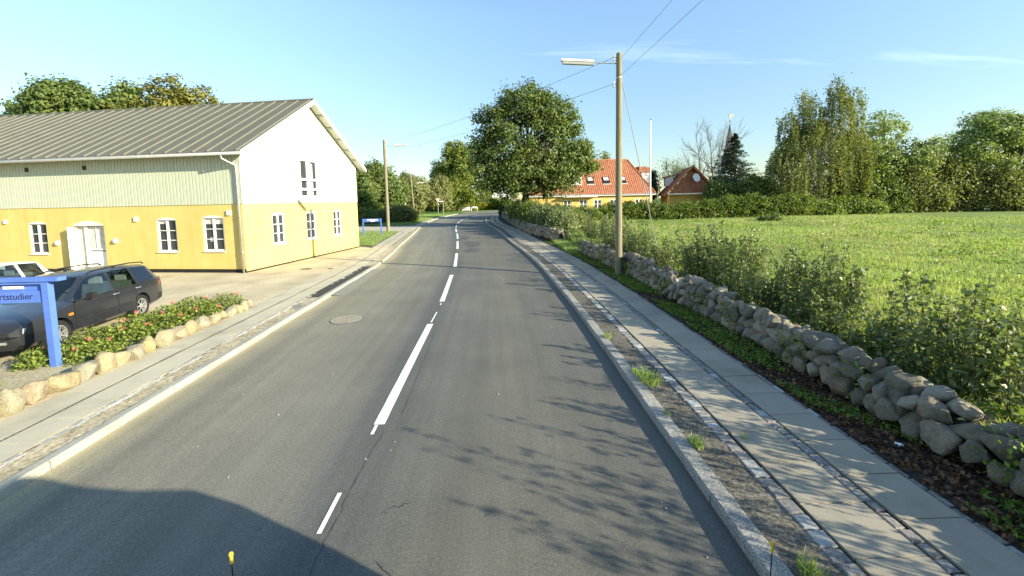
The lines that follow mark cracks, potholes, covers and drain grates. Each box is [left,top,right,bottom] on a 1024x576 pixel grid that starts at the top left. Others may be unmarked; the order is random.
manhole cover [330,315,363,324]
